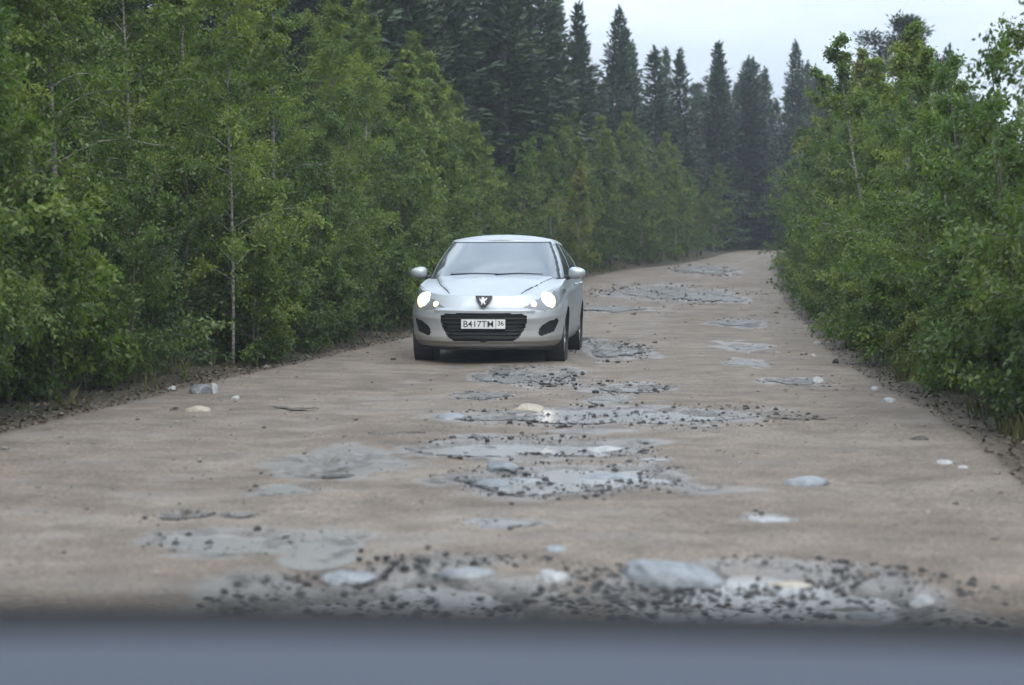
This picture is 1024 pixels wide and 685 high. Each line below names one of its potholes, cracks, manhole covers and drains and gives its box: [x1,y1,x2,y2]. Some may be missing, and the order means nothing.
pothole [124,525,356,557]
pothole [705,318,771,328]
pothole [426,458,721,500]
pothole [404,434,661,460]
pothole [458,514,553,530]
pothole [259,447,395,478]
pothole [470,364,585,387]
pothole [275,532,369,571]
pothole [727,341,766,352]
pothole [572,379,678,394]
pothole [668,263,739,276]
pothole [430,401,821,431]
